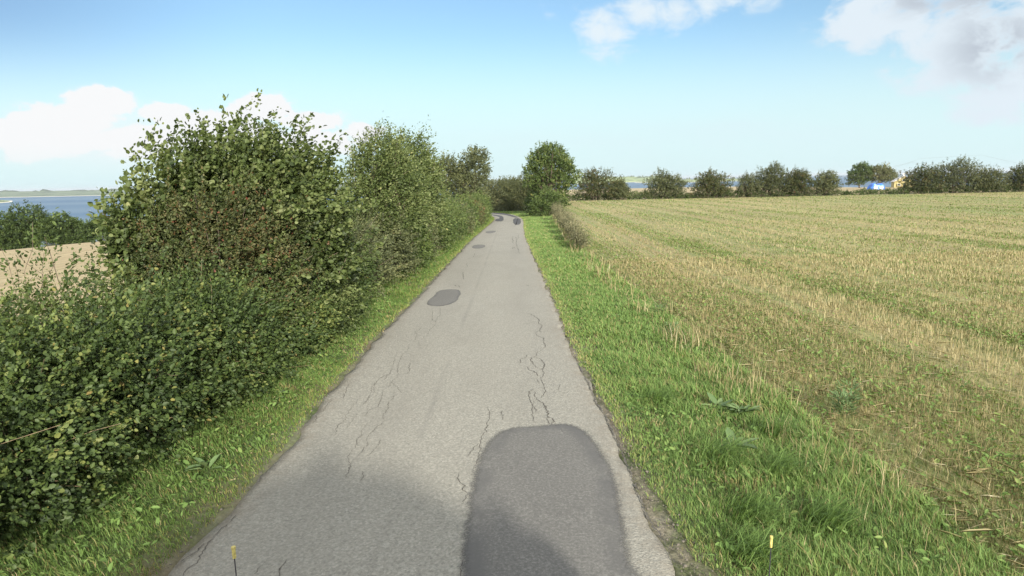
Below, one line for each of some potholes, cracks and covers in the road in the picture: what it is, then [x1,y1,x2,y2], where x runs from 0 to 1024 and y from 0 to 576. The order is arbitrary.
crack [520,313,559,425]
crack [302,313,438,477]
crack [178,512,240,576]
crack [457,407,503,503]
